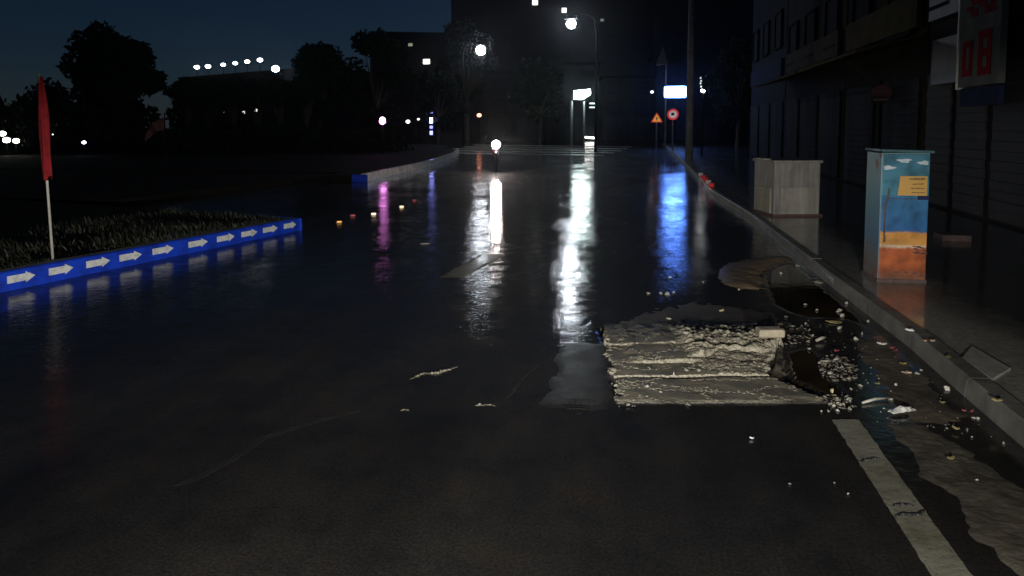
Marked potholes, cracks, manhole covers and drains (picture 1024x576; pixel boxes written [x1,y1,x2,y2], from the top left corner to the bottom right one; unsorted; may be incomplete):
crack [173,411,360,487]
crack [475,360,546,406]
pothole [600,322,828,404]
crack [411,368,453,379]
pothole [788,350,845,399]
